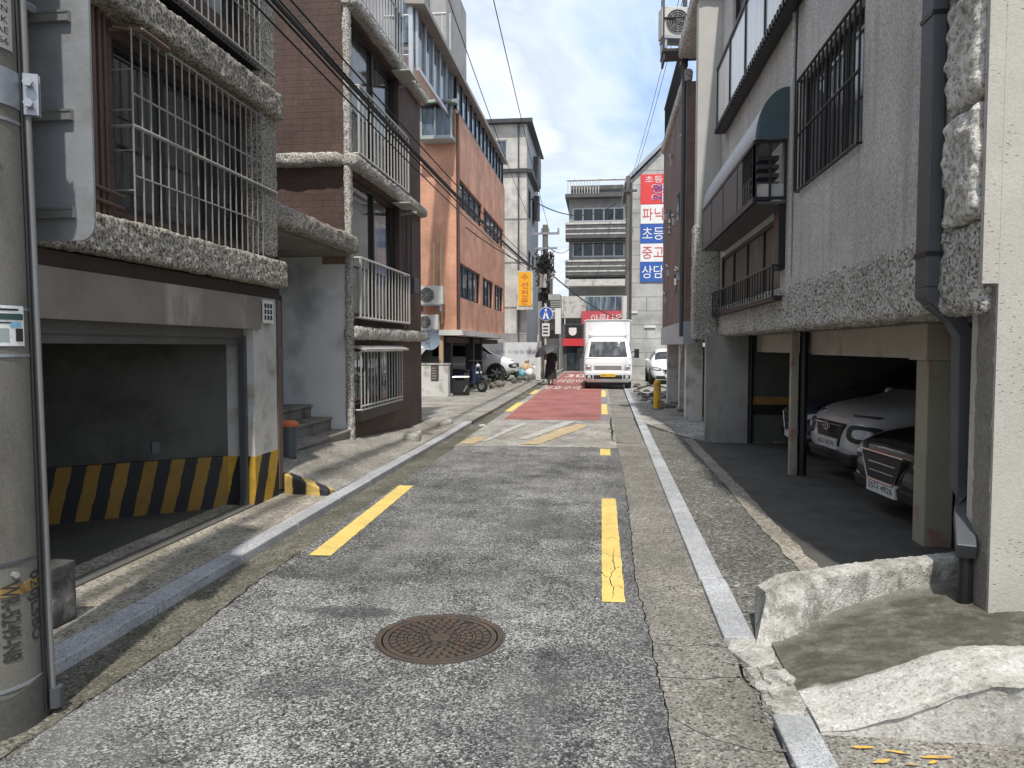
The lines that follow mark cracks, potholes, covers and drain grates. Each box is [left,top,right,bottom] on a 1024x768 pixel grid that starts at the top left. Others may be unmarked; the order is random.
manhole cover [374,614,505,665]
